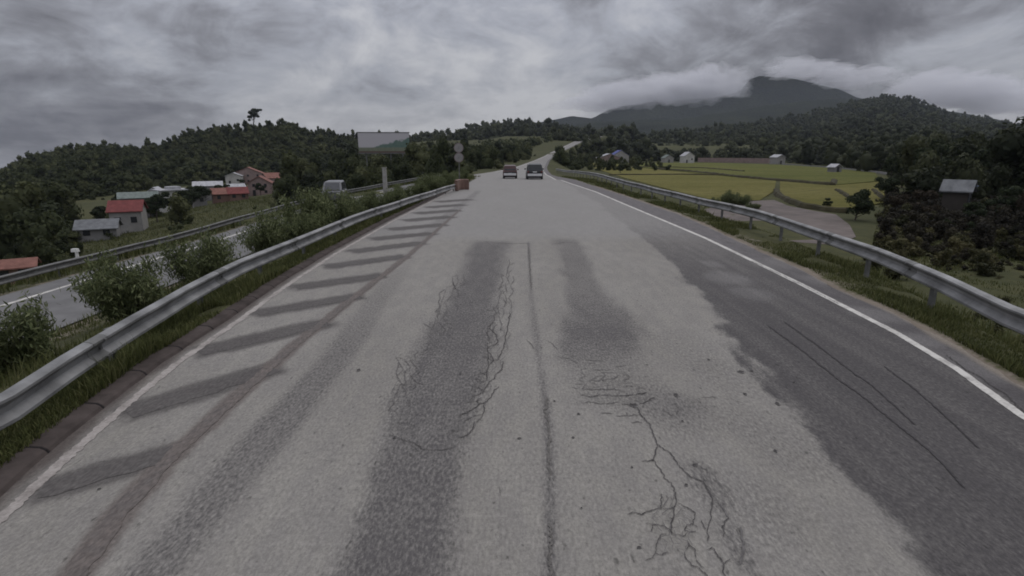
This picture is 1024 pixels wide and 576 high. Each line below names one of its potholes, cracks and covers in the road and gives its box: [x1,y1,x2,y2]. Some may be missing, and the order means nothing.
crack [547,340,745,576]
crack [388,259,515,453]
crack [768,321,1024,489]
